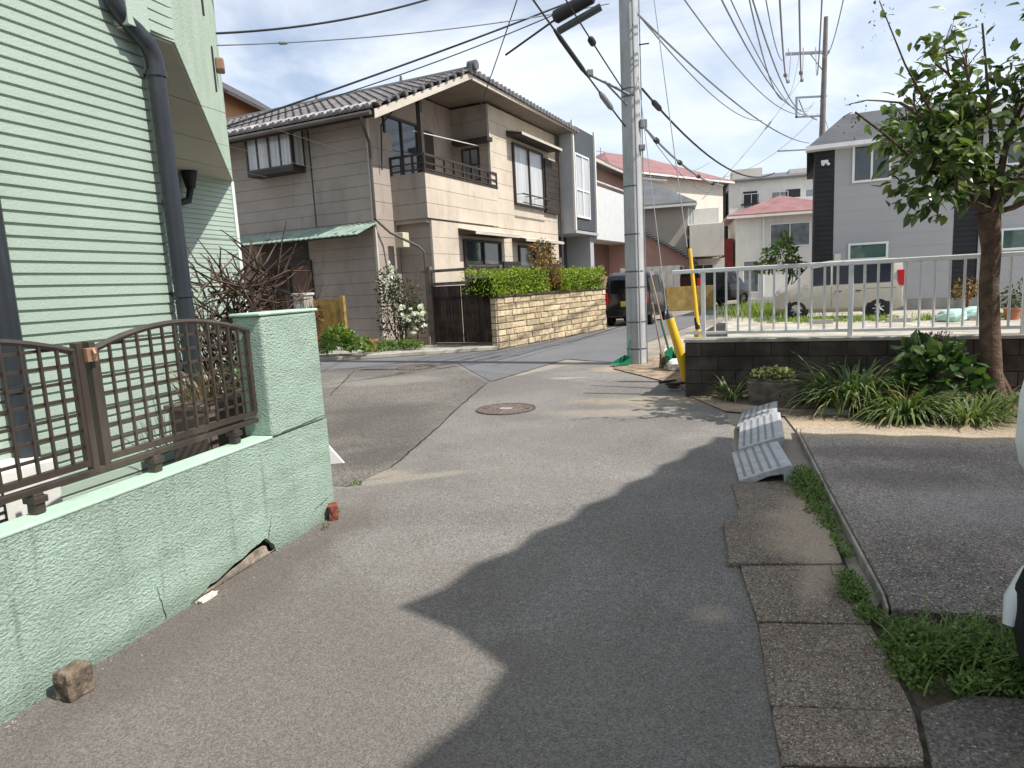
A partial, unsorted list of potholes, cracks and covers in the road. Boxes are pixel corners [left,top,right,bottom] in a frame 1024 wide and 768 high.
manhole cover [476,403,536,415]
